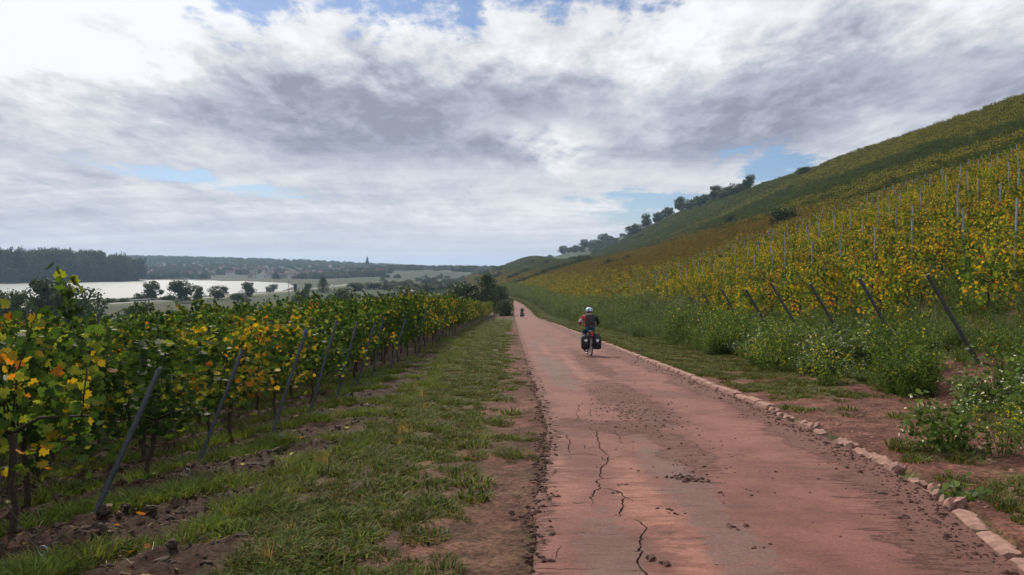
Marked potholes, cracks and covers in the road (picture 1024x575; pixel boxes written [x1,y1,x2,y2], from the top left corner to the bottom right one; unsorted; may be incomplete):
crack [565,407,648,575]
